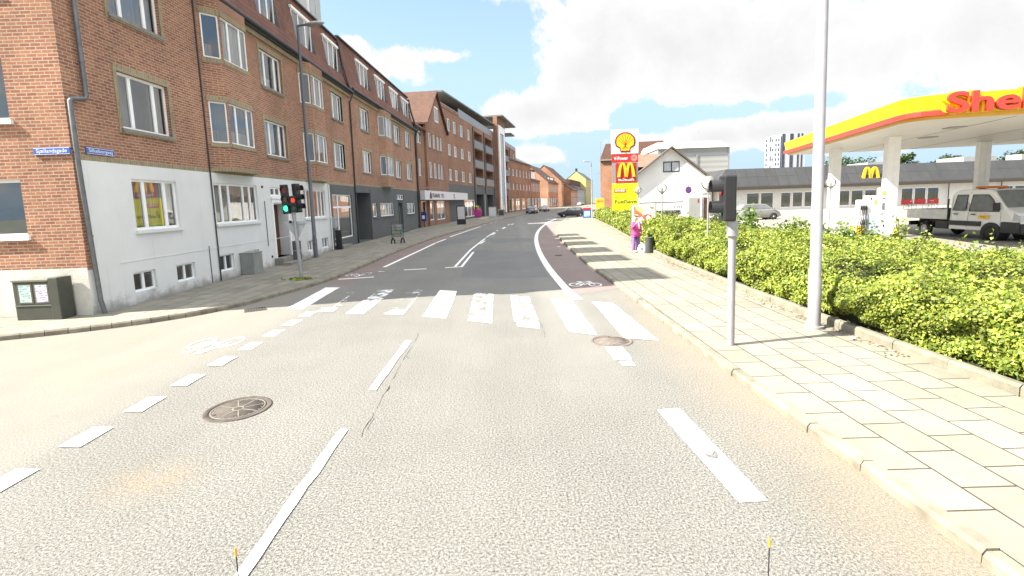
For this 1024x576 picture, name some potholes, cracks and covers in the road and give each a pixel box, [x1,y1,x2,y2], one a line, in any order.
manhole cover [202,396,272,423]
manhole cover [590,335,633,347]
